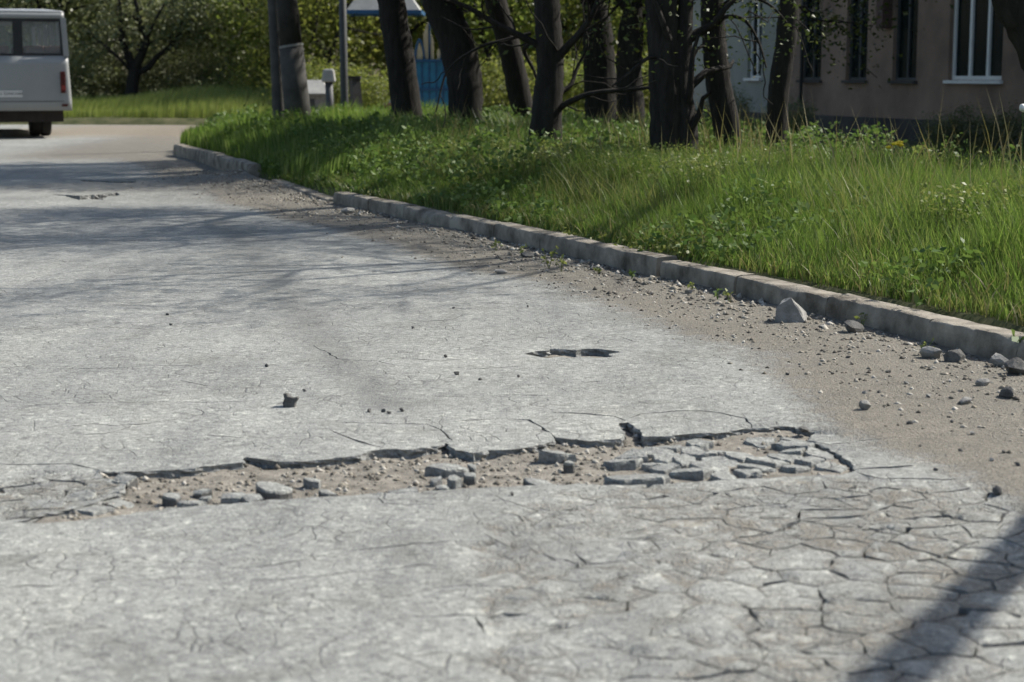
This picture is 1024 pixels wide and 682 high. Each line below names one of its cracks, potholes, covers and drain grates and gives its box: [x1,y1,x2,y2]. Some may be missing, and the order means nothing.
crack [857,465,952,480]
pothole [53,192,120,200]
pothole [19,422,855,523]
crack [198,540,532,590]
crack [10,577,128,587]
crack [429,613,527,633]
pothole [525,349,619,358]
crack [479,480,1024,682]
crack [329,422,452,448]
crack [478,410,752,439]
crack [0,464,117,519]
